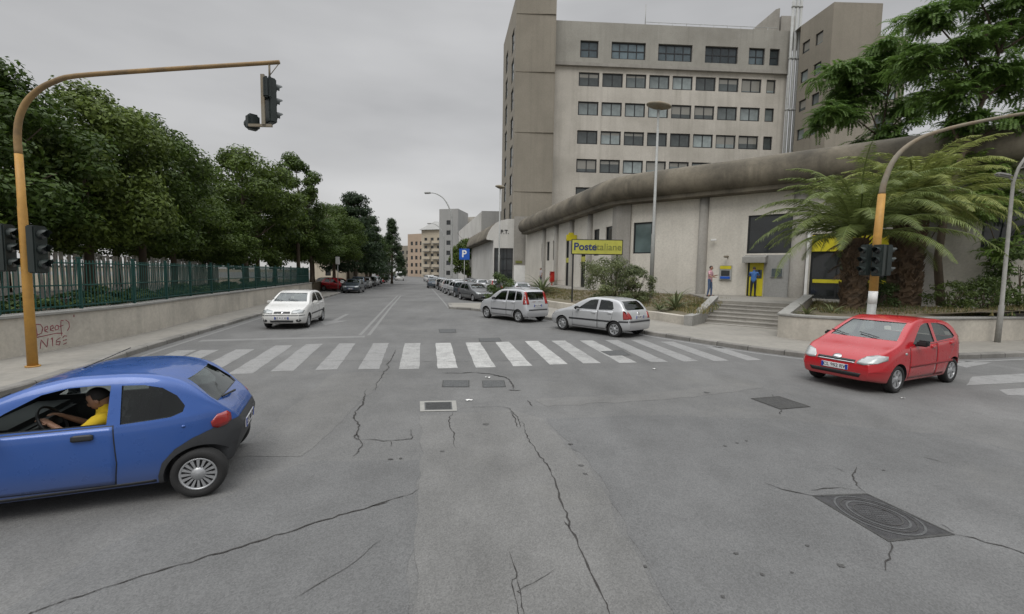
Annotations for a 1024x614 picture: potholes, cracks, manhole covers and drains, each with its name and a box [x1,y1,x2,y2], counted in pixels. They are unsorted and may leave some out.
drain grate [420,401,457,411]
crack [448,400,610,614]
crack [773,466,865,495]
manhole cover [812,493,955,542]
crack [353,352,413,456]
crack [28,489,418,614]
manhole cover [751,396,811,409]
